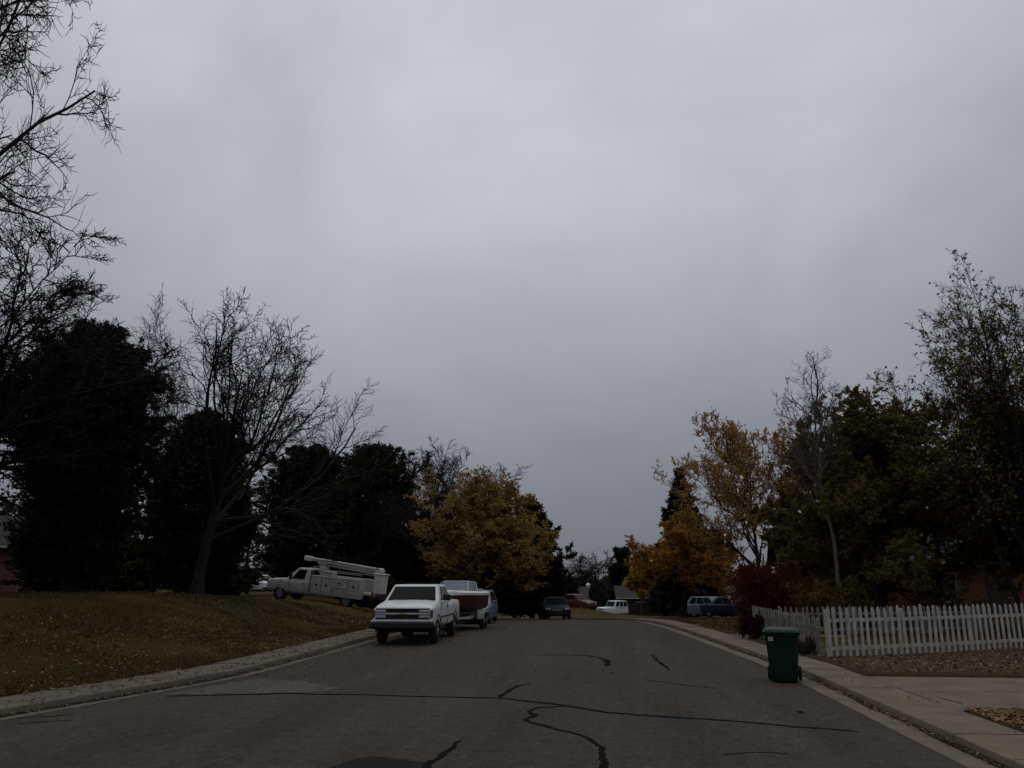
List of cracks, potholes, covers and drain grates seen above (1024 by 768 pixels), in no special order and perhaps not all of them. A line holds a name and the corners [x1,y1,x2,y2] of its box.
crack [574,655,611,666]
